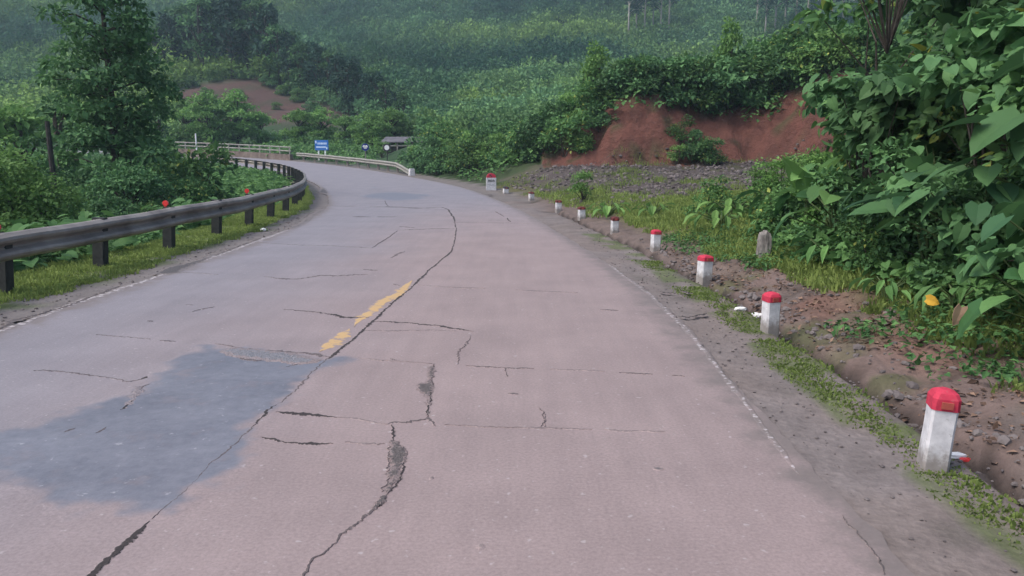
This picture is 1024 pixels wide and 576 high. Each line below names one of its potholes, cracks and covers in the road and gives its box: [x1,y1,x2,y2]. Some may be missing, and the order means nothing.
crack [284,309,474,363]
crack [34,369,149,410]
crack [96,320,175,342]
crack [264,226,415,280]
crack [262,364,435,576]
